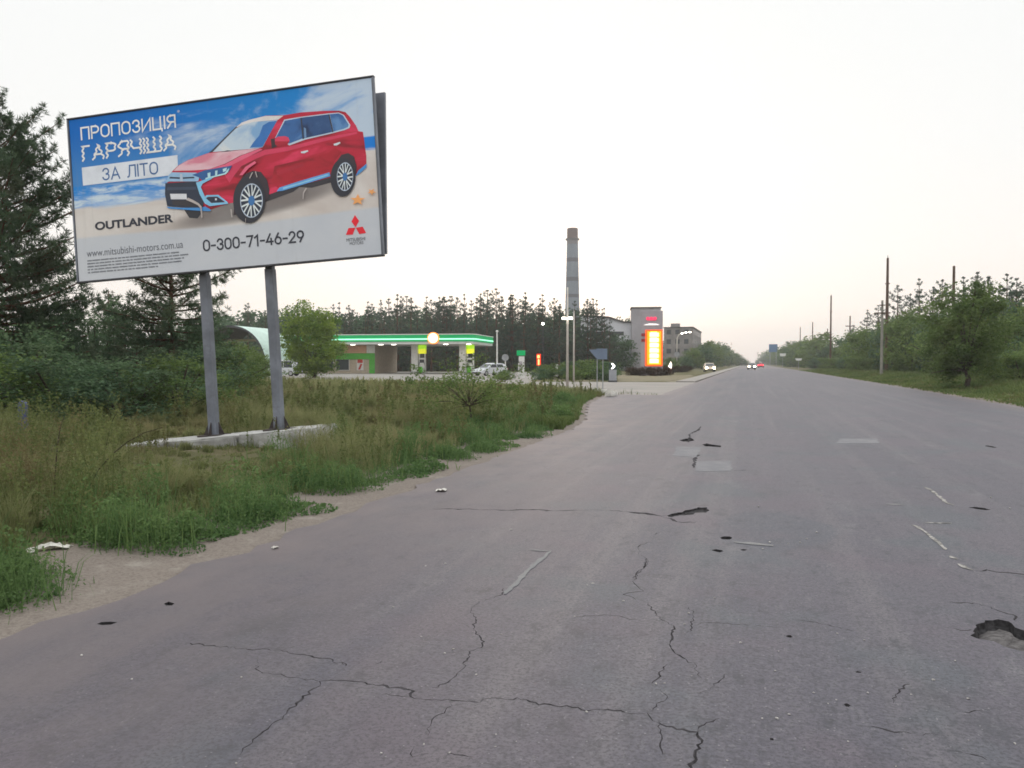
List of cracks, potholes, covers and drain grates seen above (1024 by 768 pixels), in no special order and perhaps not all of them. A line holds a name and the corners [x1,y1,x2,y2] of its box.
pothole [970,619,1024,651]
crack [457,509,687,523]
crack [185,589,719,768]
crack [580,533,768,691]
crack [687,427,701,468]
